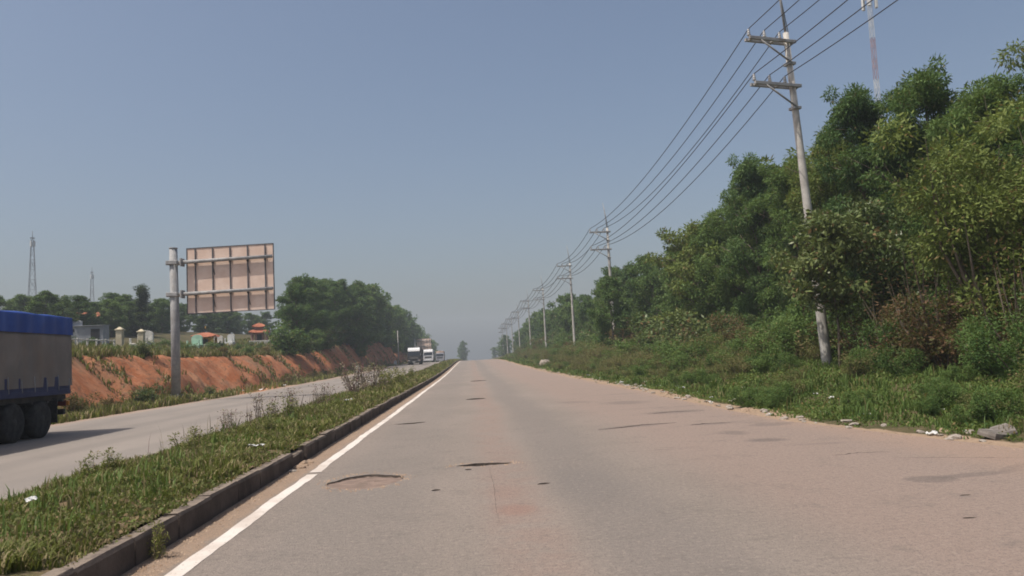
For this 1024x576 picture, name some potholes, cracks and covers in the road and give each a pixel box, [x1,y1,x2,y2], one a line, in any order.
pothole [325,474,404,490]
